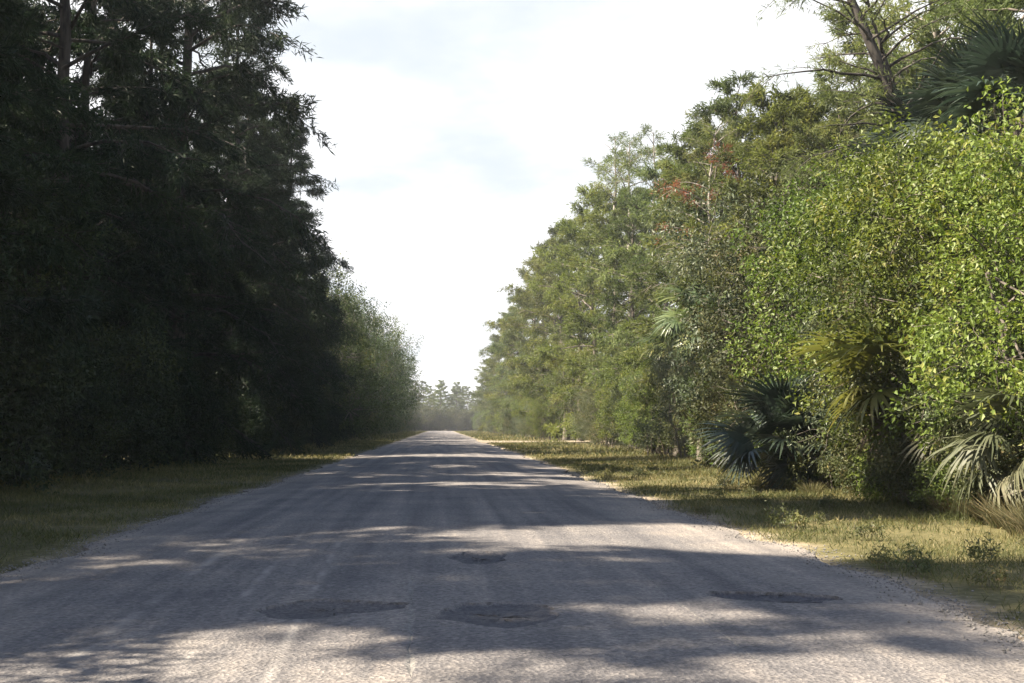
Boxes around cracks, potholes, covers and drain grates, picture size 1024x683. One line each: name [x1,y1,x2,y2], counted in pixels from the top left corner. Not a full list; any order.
pothole [432,602,560,629]
pothole [705,591,843,604]
pothole [447,551,507,564]
crack [405,575,416,676]
pothole [253,599,410,619]
